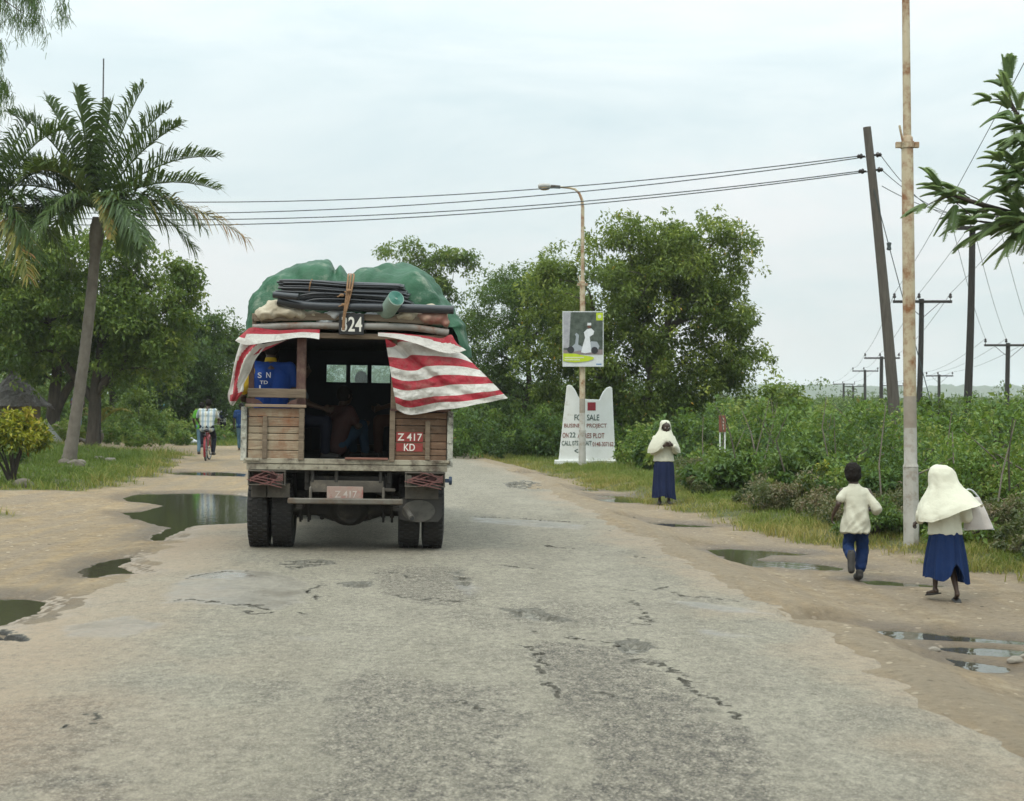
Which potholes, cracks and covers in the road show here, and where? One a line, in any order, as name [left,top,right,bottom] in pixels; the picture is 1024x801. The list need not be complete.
crack [177,599,274,615]
pothole [503,480,543,489]
crack [519,631,744,720]
pothole [279,559,338,570]
